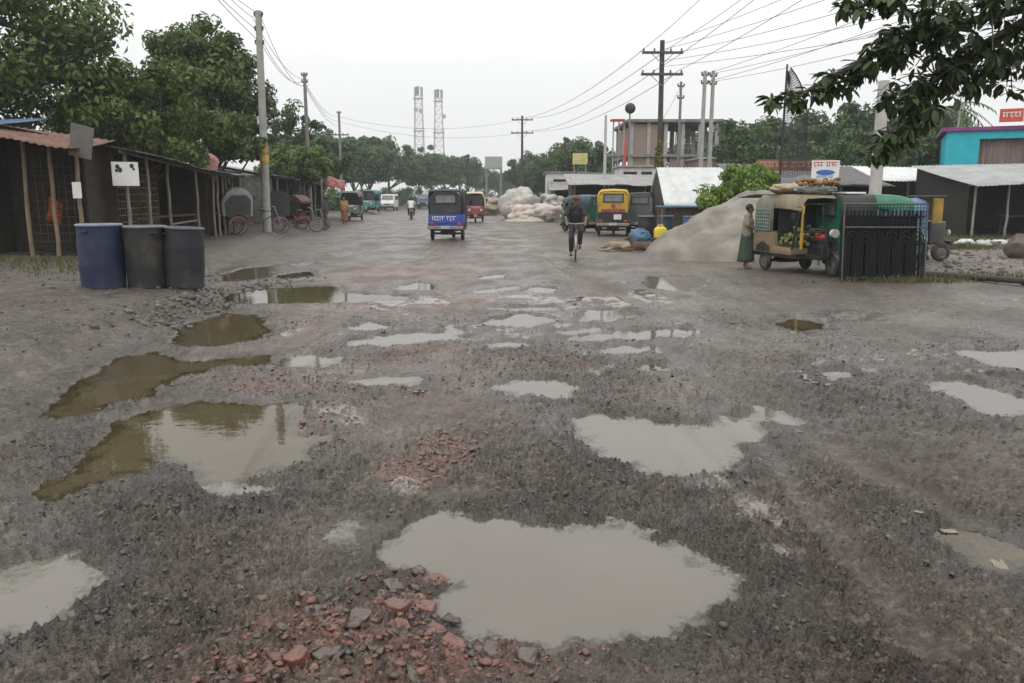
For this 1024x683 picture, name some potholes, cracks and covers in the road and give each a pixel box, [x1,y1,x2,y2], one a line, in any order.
pothole [765,317,831,332]
pothole [912,373,1024,418]
pothole [557,404,777,481]
pothole [337,320,480,347]
pothole [35,348,276,419]
pothole [273,270,316,279]
pothole [218,283,418,304]
pothole [0,538,117,648]
pothole [215,264,279,282]
pothole [362,502,773,669]
pothole [21,393,339,504]
pothole [471,310,566,328]
